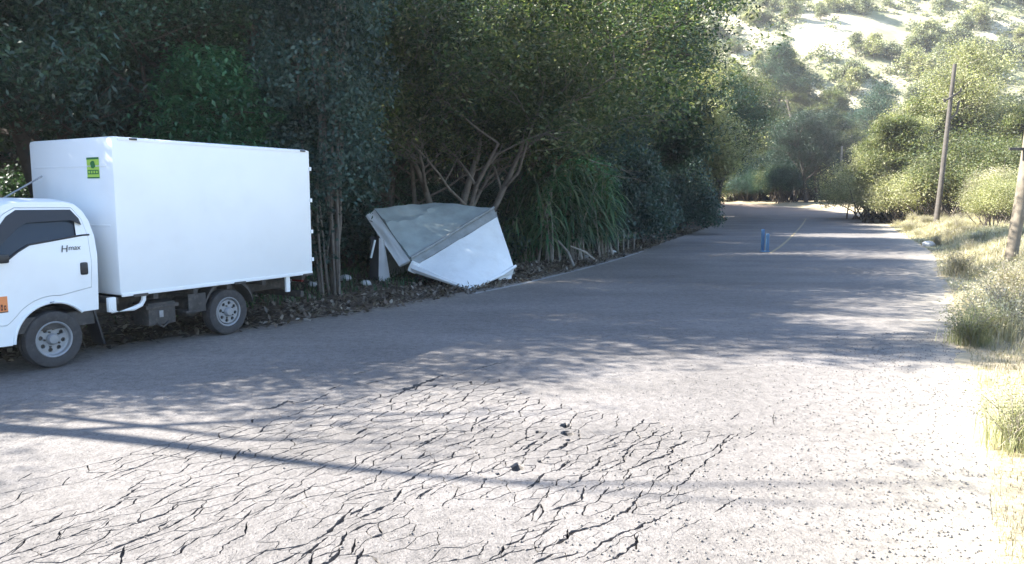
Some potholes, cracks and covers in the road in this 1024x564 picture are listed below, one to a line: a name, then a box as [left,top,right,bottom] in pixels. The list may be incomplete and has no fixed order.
crack [0,360,775,564]
